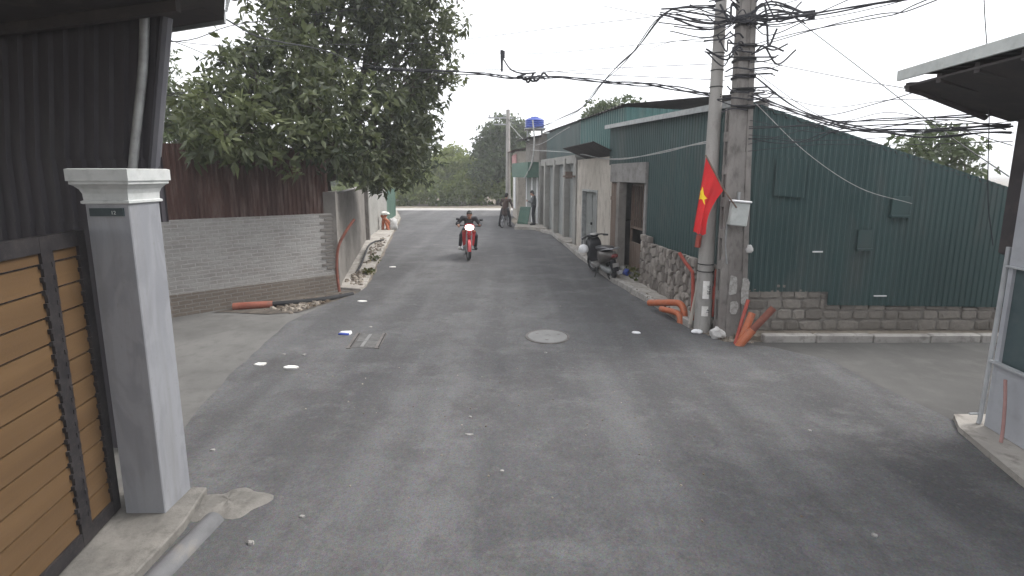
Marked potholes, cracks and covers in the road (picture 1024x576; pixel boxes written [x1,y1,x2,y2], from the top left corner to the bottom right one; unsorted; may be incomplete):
manhole cover [526,329,570,344]
